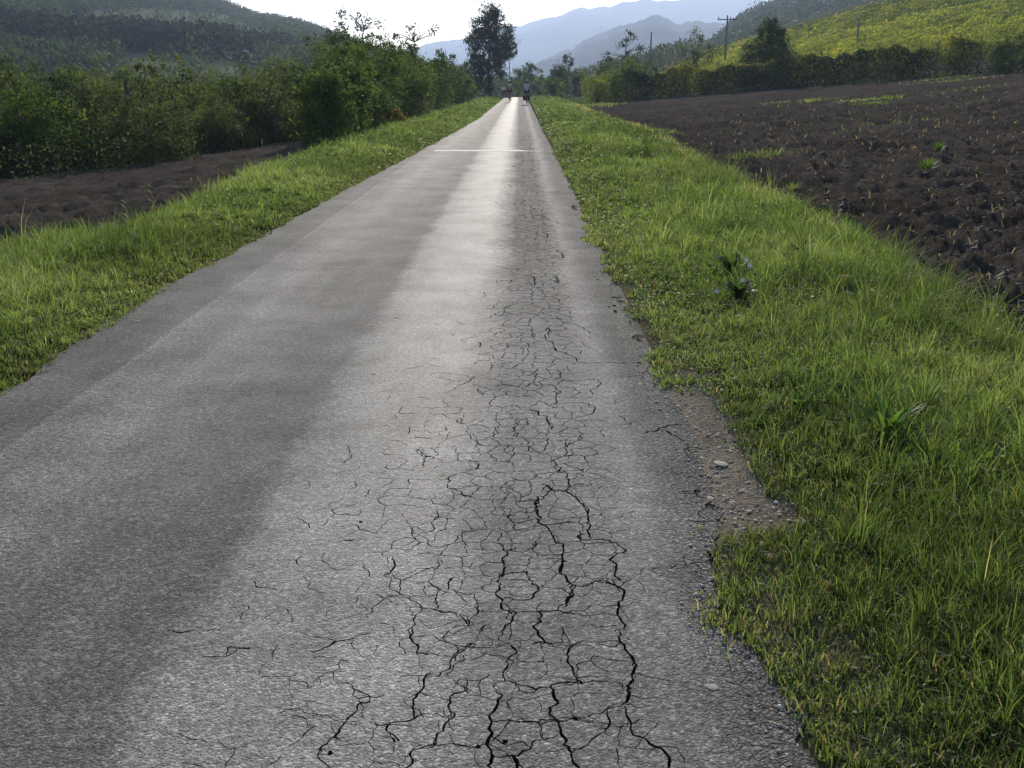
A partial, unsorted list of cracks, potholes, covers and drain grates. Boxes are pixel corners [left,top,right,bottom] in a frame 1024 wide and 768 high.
crack [167,629,250,658]
crack [180,134,694,768]
crack [652,552,713,570]
